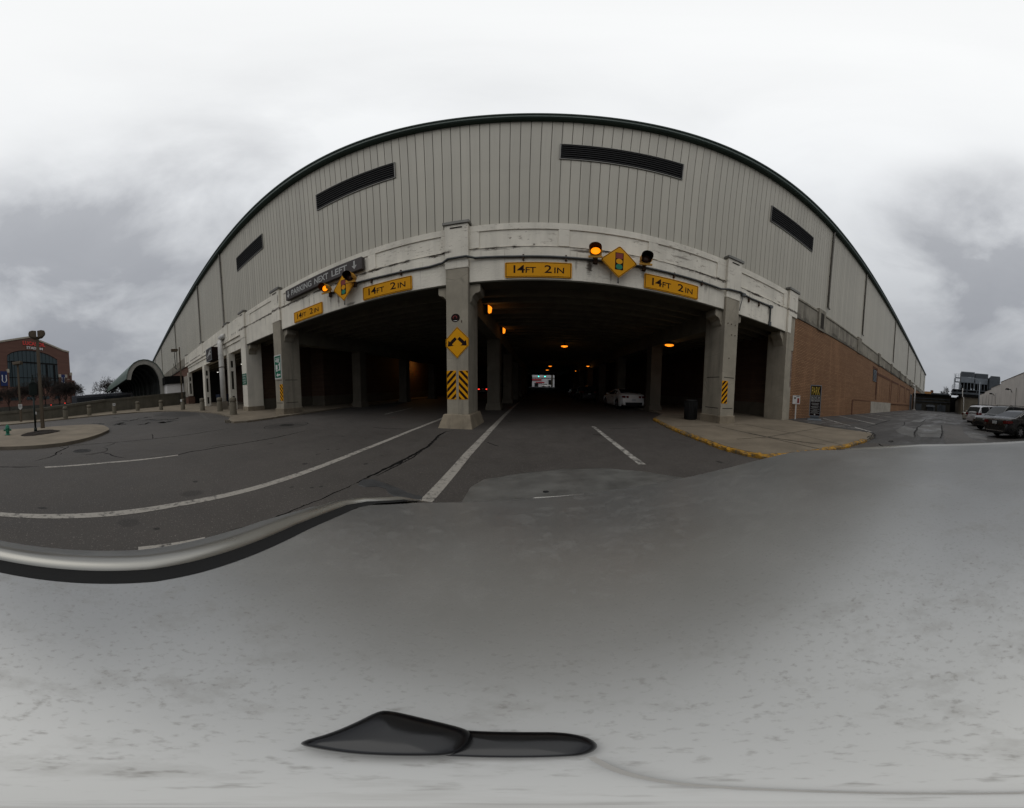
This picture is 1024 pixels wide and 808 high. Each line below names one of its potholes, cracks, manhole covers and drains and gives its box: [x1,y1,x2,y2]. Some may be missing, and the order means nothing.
crack [36,415,222,461]
crack [231,427,452,530]
